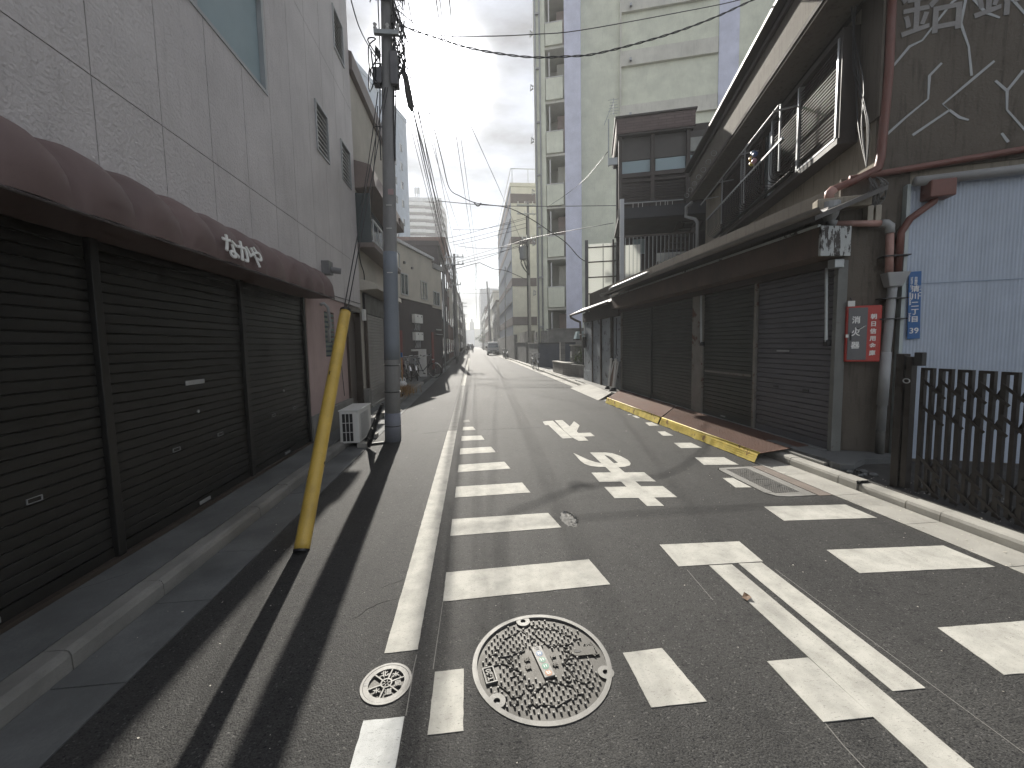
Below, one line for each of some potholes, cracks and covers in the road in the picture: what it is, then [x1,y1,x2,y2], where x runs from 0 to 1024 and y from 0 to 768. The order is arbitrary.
utility cover [360,663,412,706]
manhole cover [472,615,614,727]
pothole [560,511,579,528]
